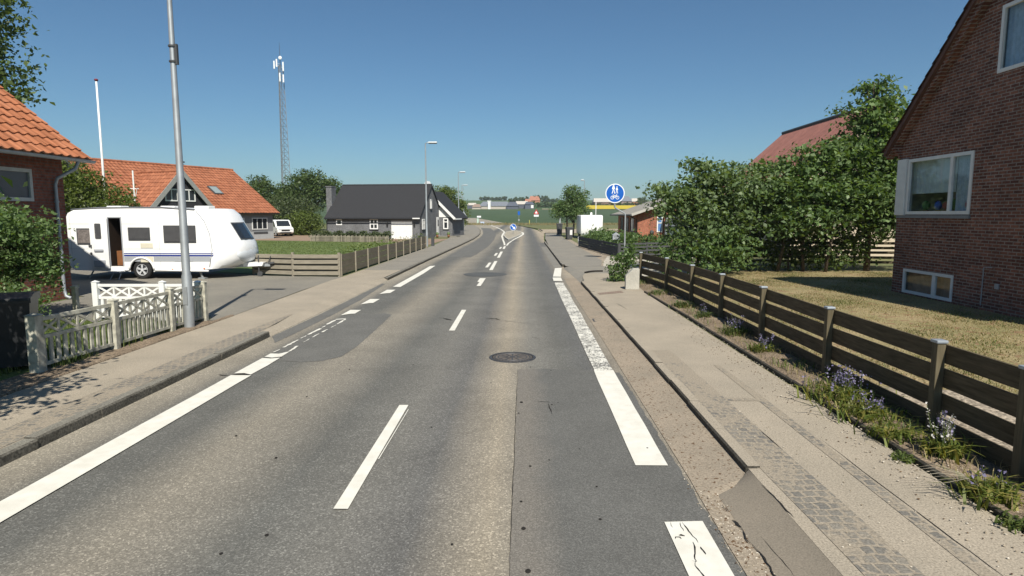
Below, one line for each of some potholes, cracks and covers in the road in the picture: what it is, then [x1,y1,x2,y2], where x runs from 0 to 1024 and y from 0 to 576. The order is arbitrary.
manhole cover [489,352,536,363]
crack [671,522,706,576]
